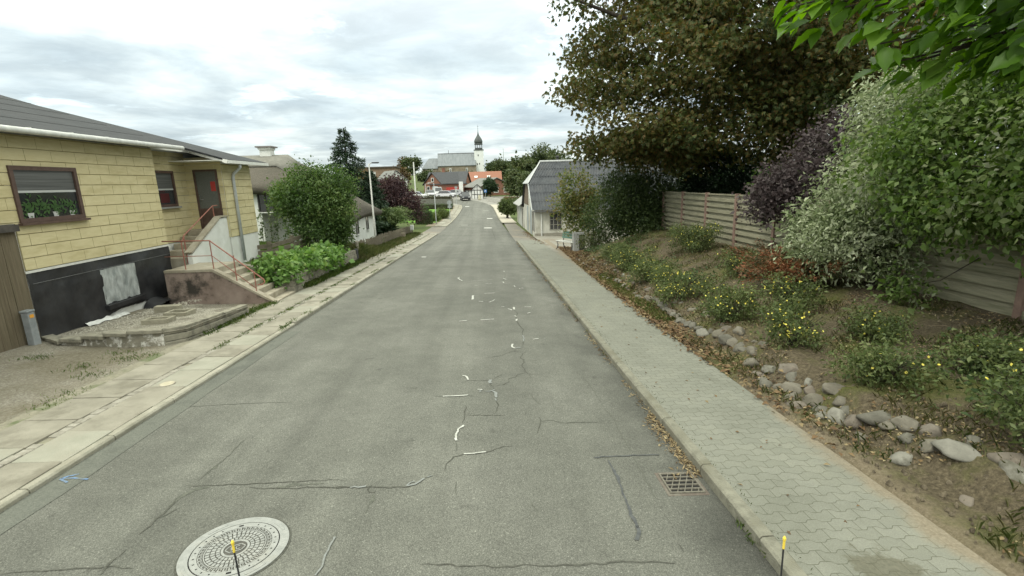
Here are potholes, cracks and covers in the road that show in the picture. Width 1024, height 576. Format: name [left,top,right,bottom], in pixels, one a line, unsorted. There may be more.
drain grate [654,472,710,496]
crack [141,266,539,533]
manhole cover [174,517,291,576]
crack [425,376,684,568]
